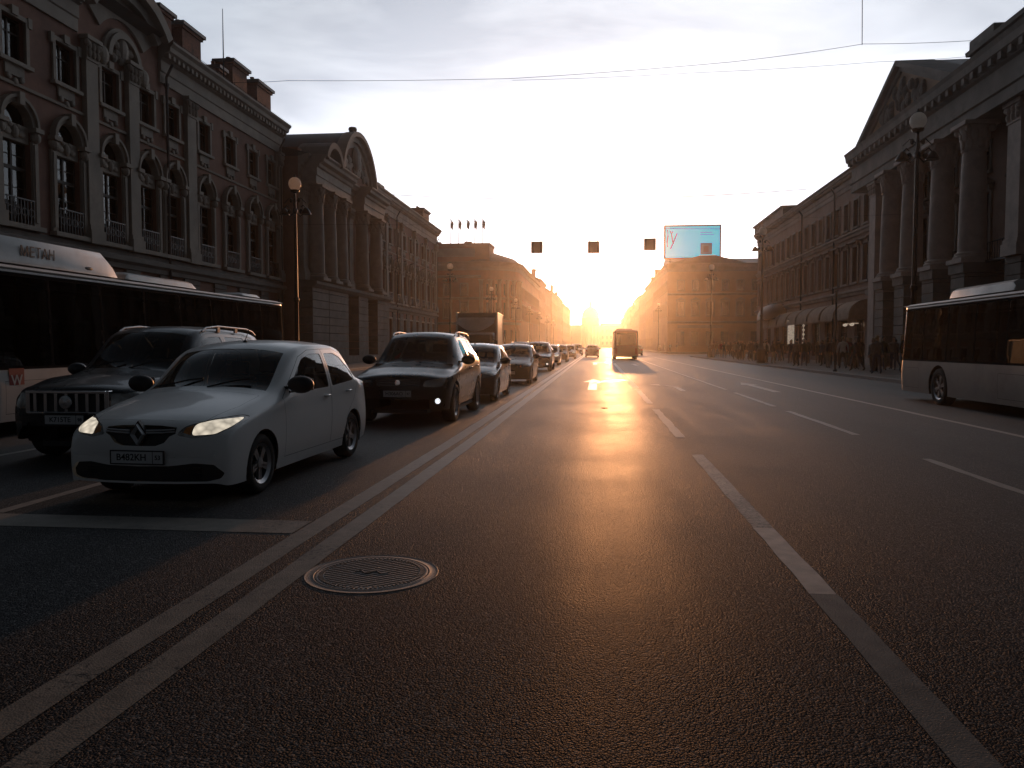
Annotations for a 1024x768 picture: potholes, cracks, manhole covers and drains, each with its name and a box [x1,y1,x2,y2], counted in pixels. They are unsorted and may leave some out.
manhole cover [303,555,439,594]
